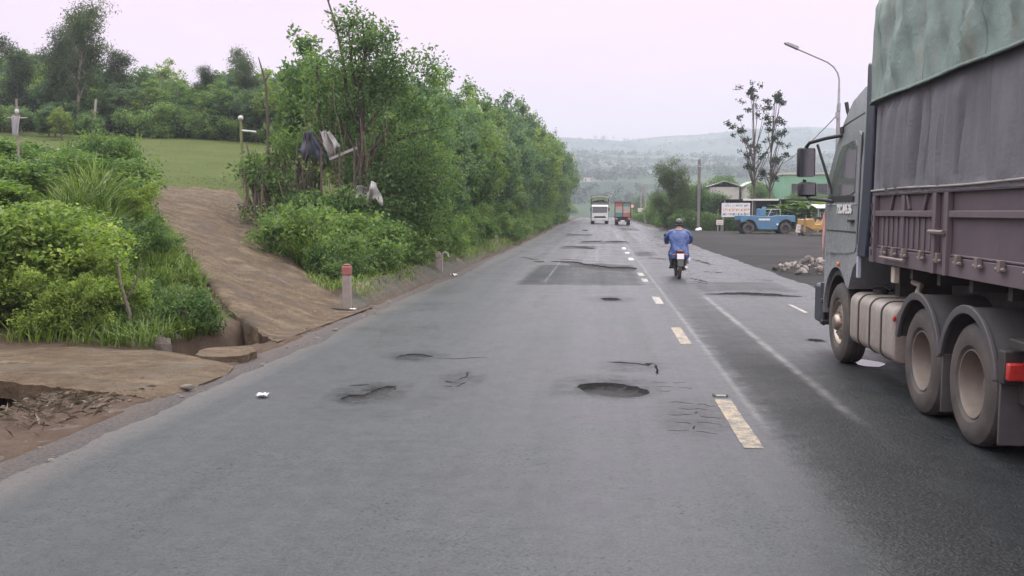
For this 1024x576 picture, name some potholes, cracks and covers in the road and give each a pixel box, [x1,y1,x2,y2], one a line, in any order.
crack [446,357,483,387]
pothole [336,386,402,402]
crack [612,362,722,434]
pothole [574,382,652,399]
